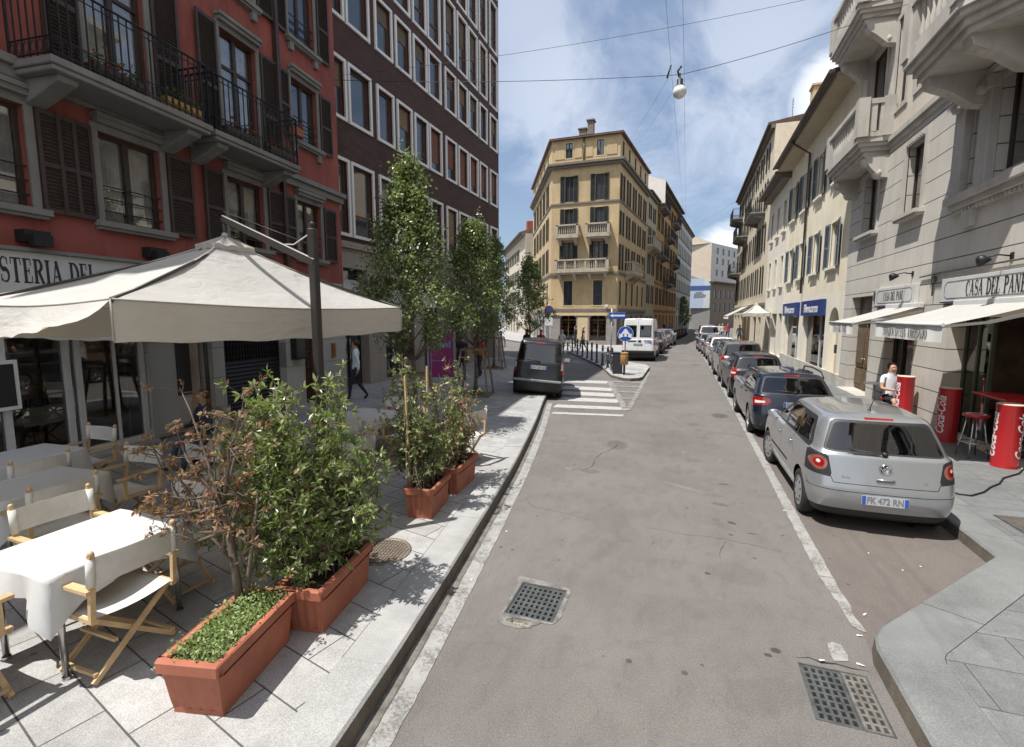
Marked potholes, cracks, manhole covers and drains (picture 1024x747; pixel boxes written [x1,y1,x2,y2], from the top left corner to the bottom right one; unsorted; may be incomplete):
drain grate [798,662,898,739]
manhole cover [369,538,411,566]
drain grate [497,576,570,629]
